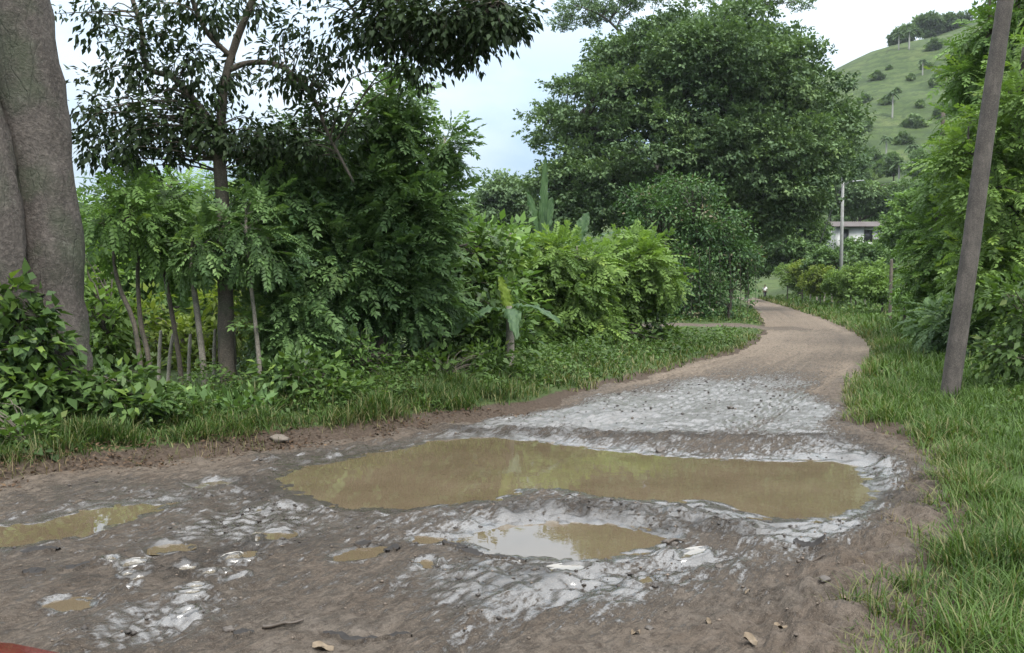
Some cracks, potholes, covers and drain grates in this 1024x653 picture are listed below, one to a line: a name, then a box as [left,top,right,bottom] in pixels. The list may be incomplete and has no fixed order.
pothole [140,538,199,559]
pothole [0,494,194,553]
pothole [35,593,102,617]
pothole [251,428,907,528]
pothole [324,543,395,564]
pothole [443,510,688,564]
